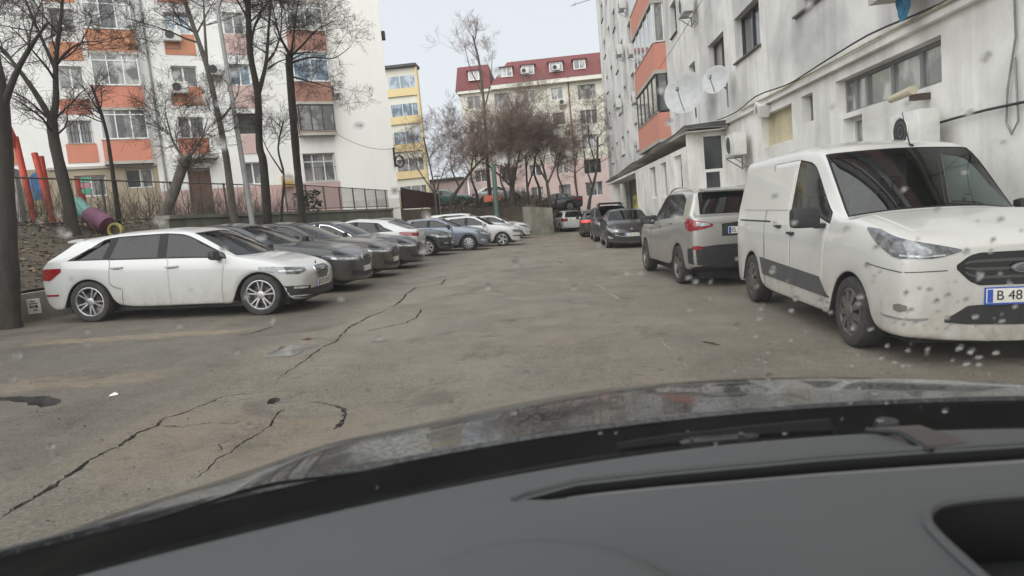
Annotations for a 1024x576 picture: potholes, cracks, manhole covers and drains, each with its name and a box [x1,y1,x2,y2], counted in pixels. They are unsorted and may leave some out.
crack [1,392,285,518]
crack [276,279,446,381]
